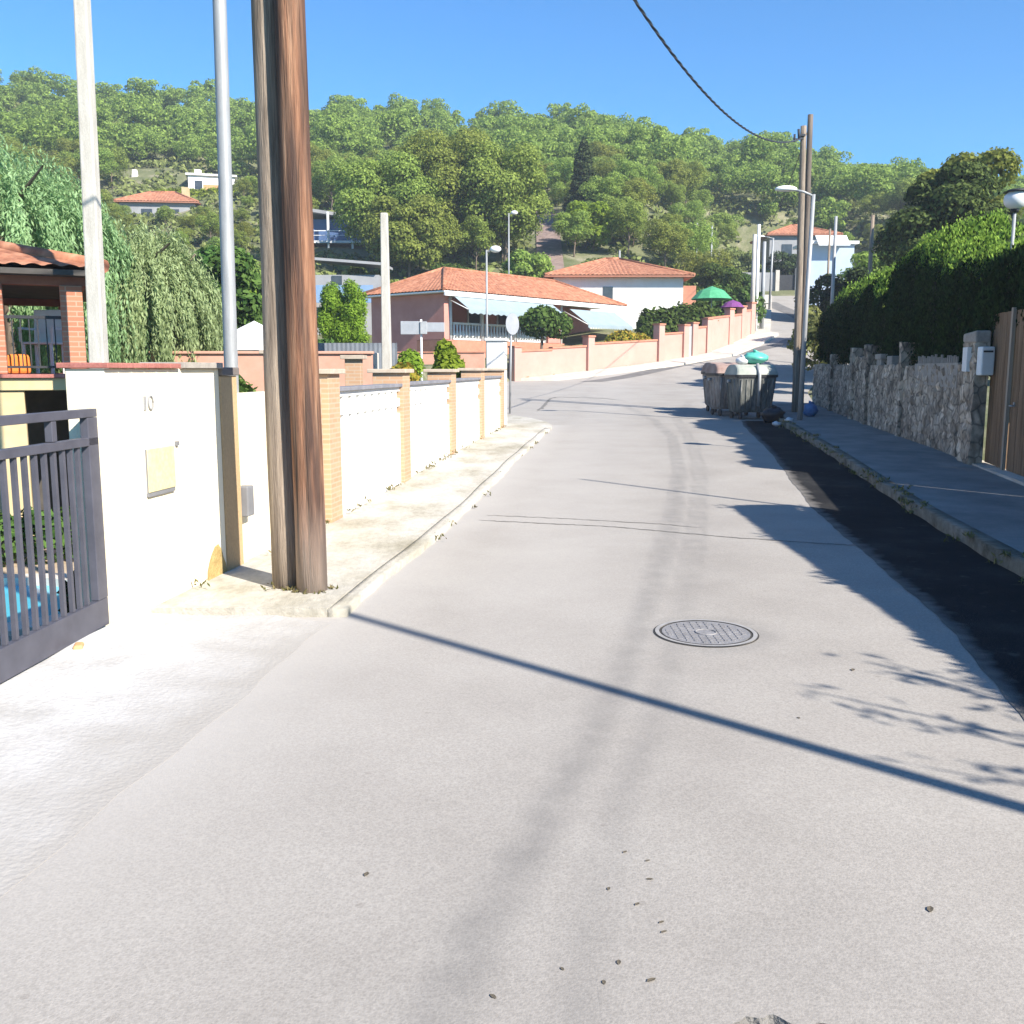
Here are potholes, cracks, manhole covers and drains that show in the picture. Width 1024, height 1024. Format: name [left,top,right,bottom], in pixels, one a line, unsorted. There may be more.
manhole cover [653,619,759,647]
